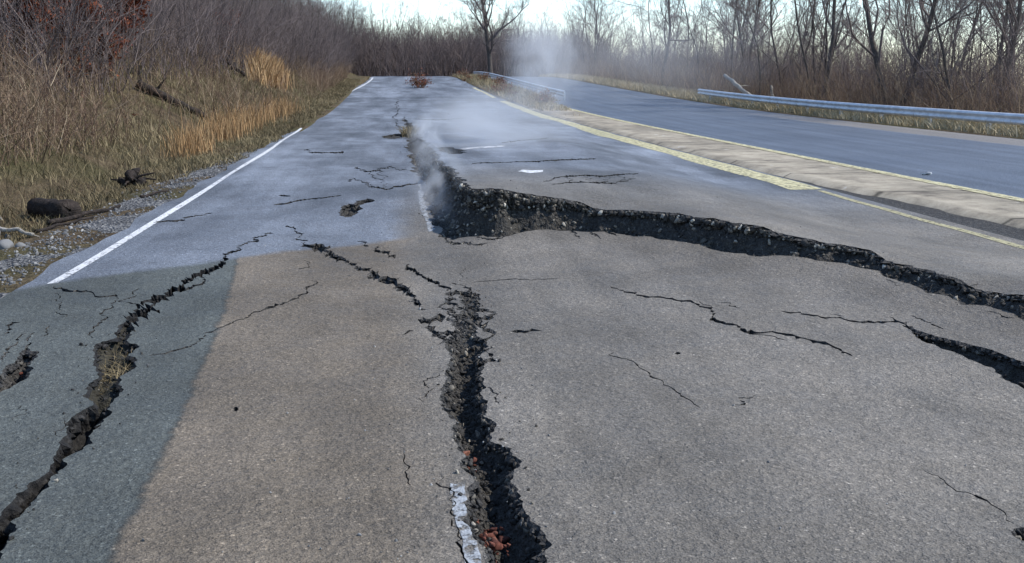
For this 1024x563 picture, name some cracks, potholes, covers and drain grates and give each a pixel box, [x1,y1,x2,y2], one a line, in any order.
pothole [338,199,375,217]
crack [0,117,1024,563]
